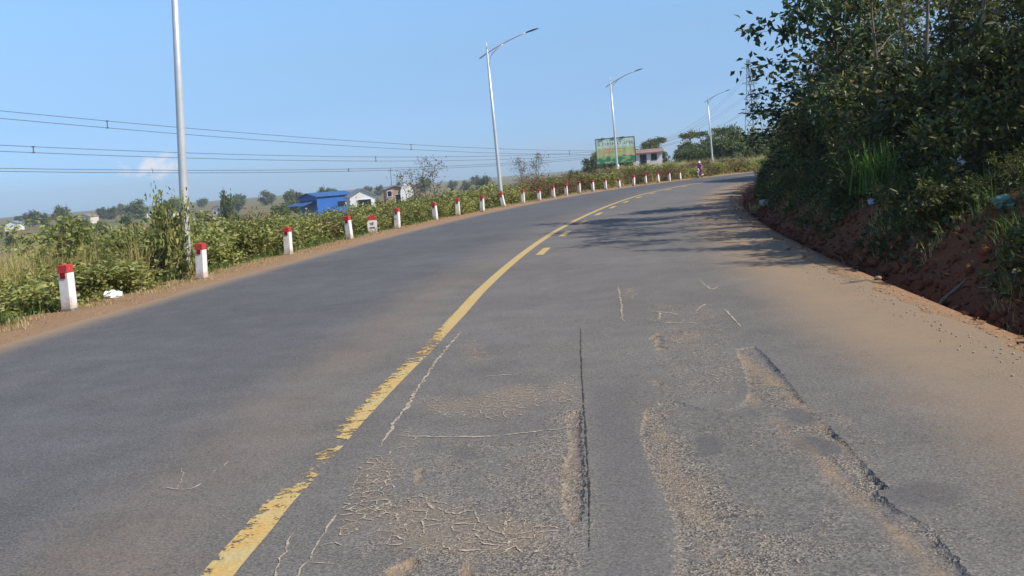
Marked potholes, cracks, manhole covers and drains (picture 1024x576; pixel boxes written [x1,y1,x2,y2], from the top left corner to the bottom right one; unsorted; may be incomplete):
pothole [559,410,588,524]
crack [274,332,577,576]
crack [655,280,717,343]
pothole [639,346,973,576]
crack [617,286,633,321]
